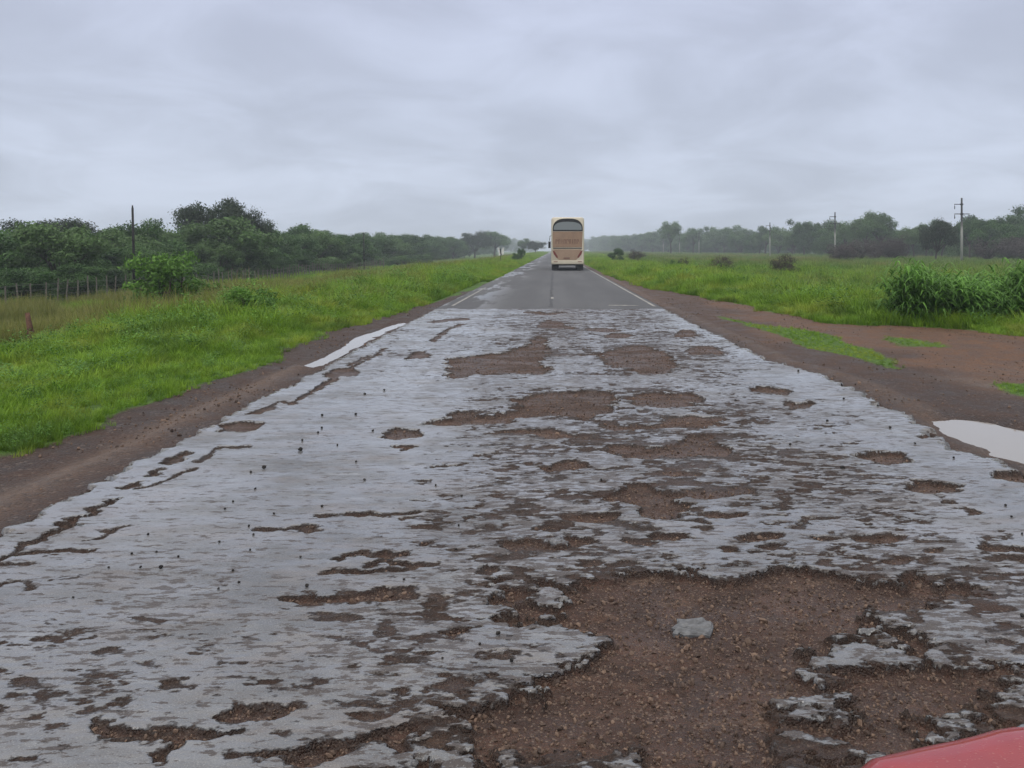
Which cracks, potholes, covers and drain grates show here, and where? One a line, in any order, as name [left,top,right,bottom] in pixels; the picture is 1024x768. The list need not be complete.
pothole [377,427,426,440]
pothole [441,335,555,379]
pothole [903,478,967,494]
pothole [396,583,423,601]
pothole [850,449,916,465]
pothole [404,556,1024,768]
pothole [206,699,311,724]
pothole [417,388,622,426]
pothole [589,482,699,520]
pothole [277,584,405,606]
pothole [596,344,683,375]
